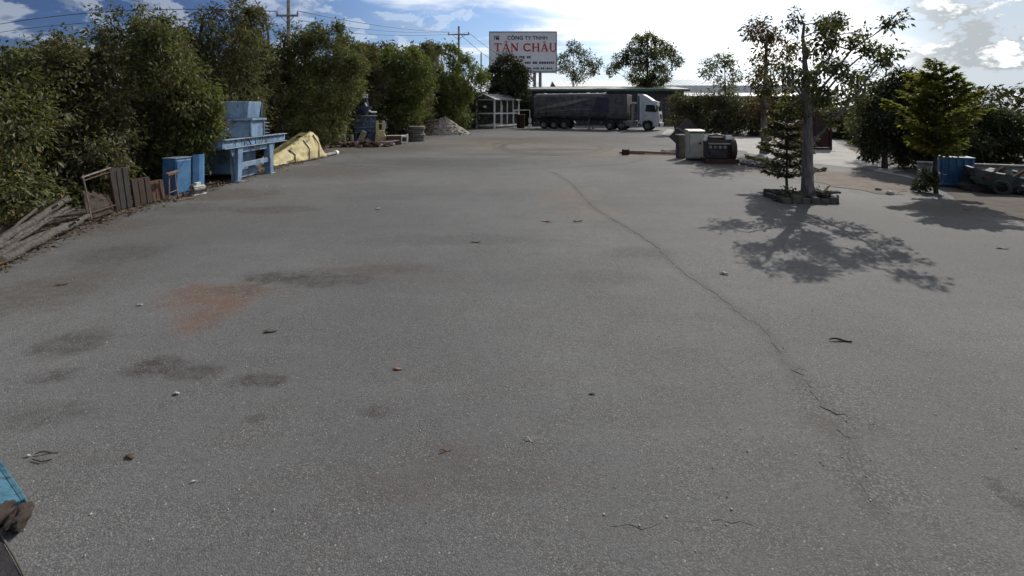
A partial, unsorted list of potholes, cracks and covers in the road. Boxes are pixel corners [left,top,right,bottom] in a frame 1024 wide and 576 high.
crack [546,171,889,513]
crack [603,513,660,531]
